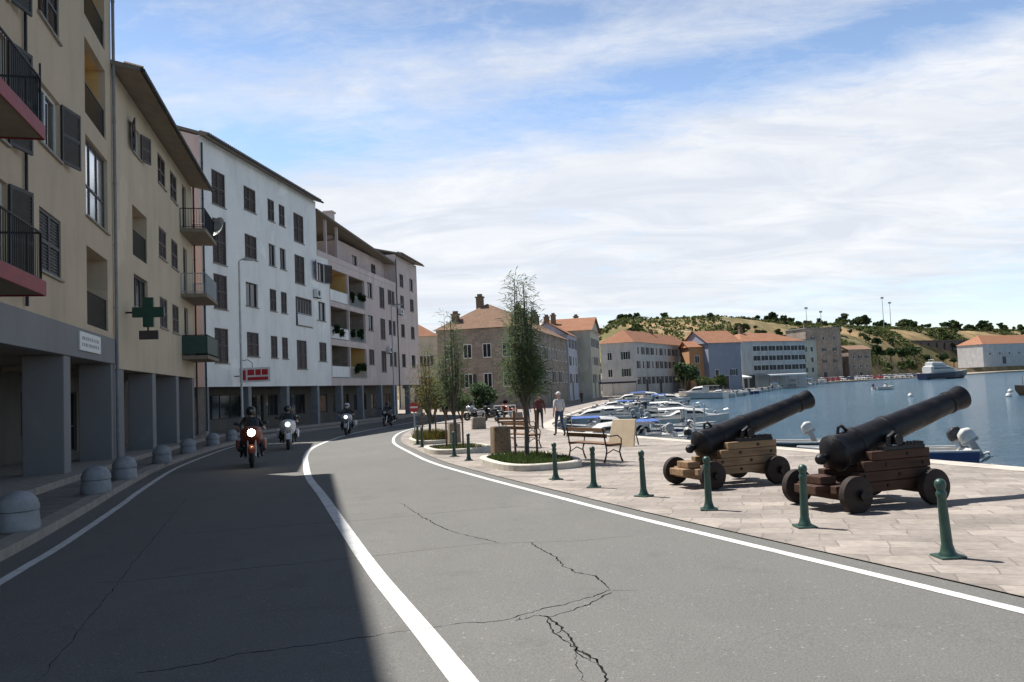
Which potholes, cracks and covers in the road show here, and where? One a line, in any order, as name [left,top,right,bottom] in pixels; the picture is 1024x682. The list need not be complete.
crack [37,499,628,682]
